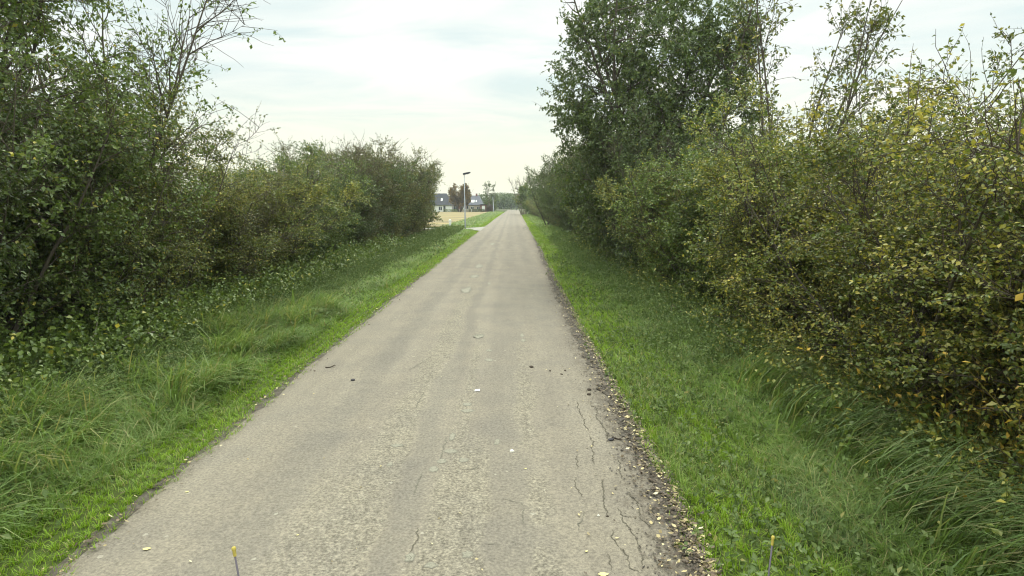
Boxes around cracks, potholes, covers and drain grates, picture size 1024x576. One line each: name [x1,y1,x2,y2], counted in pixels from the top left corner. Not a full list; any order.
crack [575,402,658,572]
